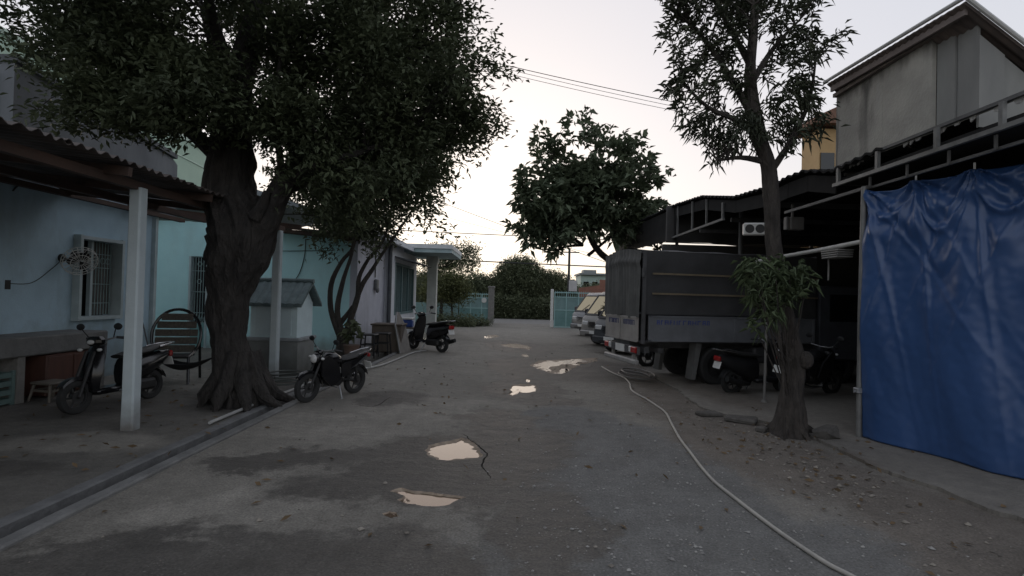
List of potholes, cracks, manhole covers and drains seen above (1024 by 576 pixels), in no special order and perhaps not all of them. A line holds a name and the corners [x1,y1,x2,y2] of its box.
pothole [390,488,466,506]
pothole [509,384,537,396]
crack [465,435,491,478]
pothole [530,358,597,374]
pothole [425,437,483,460]
